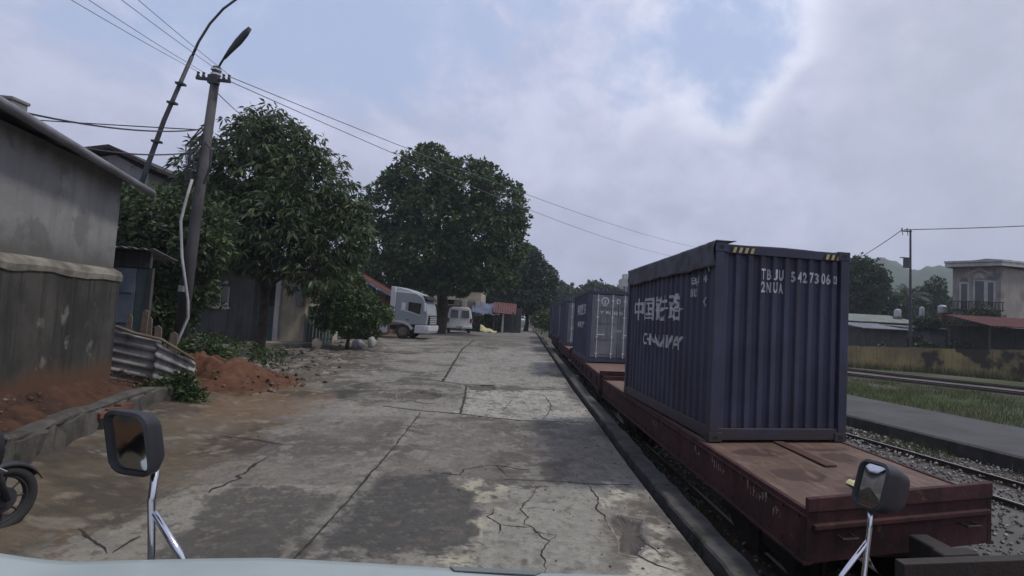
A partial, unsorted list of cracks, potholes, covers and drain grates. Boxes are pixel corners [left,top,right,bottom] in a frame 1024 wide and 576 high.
crack [208,436,289,493]
crack [79,529,139,553]
crack [483,487,556,569]
pothole [606,511,652,559]
